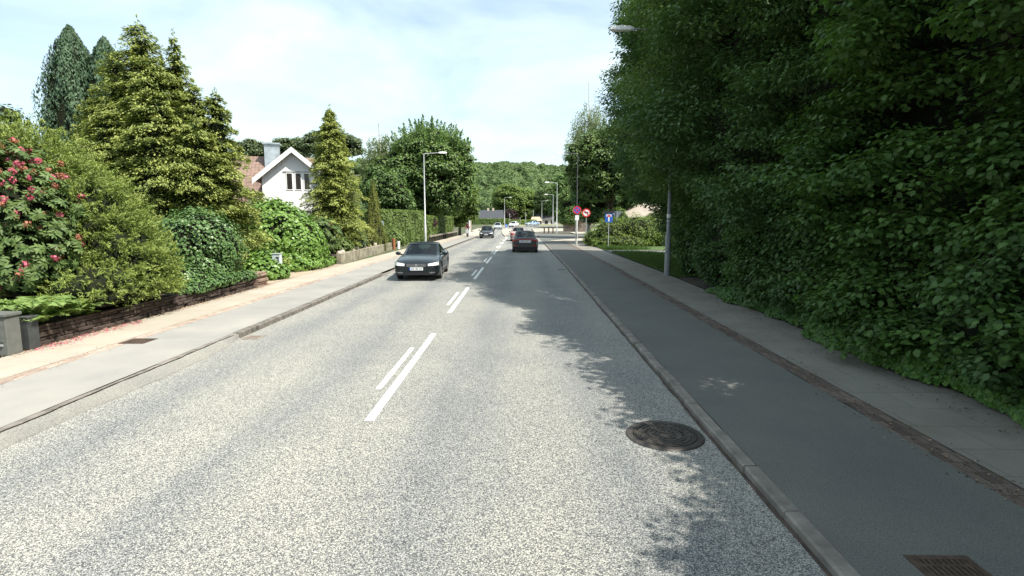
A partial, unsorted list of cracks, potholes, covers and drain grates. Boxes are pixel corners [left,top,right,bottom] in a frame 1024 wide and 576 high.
drain grate [903,555,992,576]
manhole cover [626,421,705,452]
